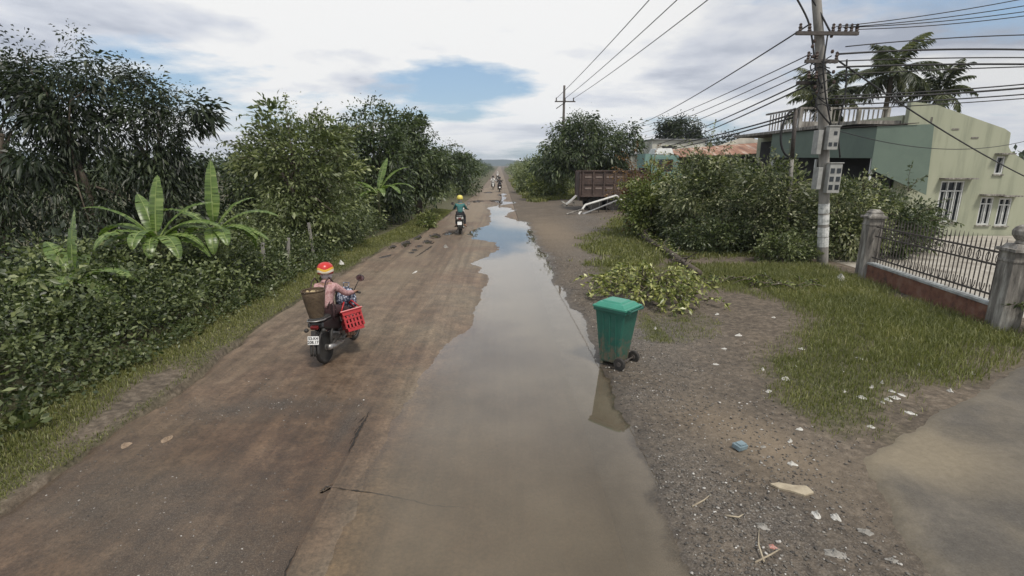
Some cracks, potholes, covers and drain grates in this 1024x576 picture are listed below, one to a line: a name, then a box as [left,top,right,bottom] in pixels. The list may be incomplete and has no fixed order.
crack [333,487,465,508]
